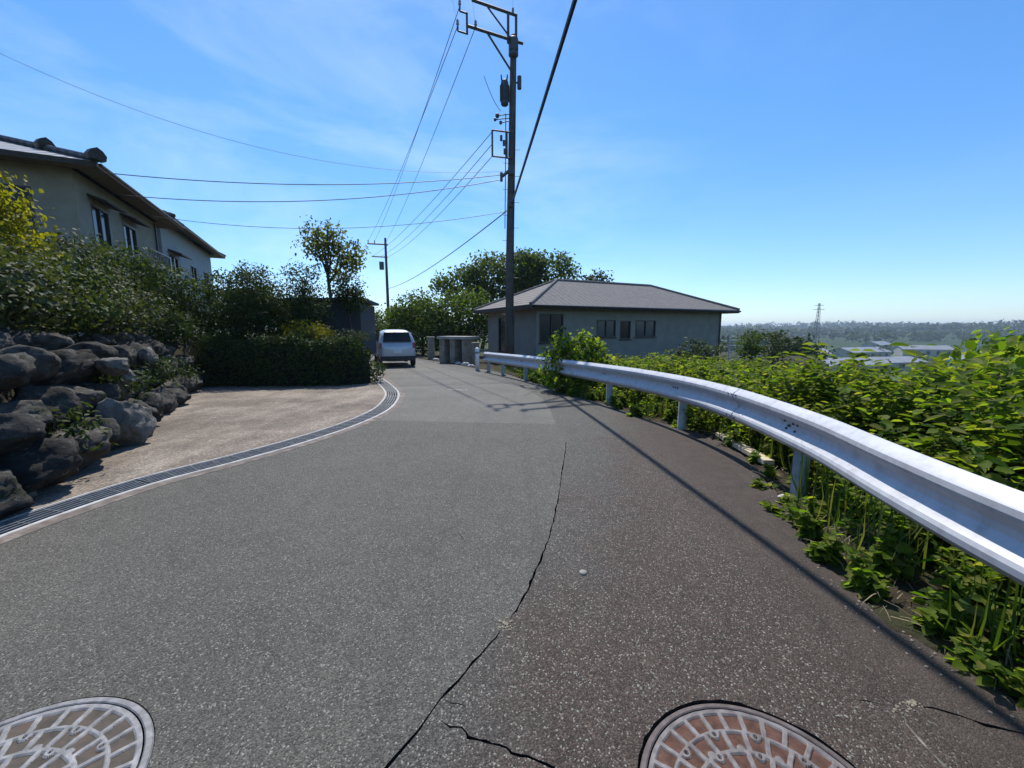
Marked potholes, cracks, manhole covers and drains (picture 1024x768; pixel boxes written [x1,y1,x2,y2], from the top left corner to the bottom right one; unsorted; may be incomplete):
drain grate [361,405,390,416]
drain grate [252,431,333,453]
drain grate [137,451,262,484]
drain grate [321,416,374,432]
manhole cover [637,699,856,768]
drain grate [0,480,149,535]
crack [384,444,566,768]
manhole cover [0,696,155,768]
crack [846,696,1024,768]
